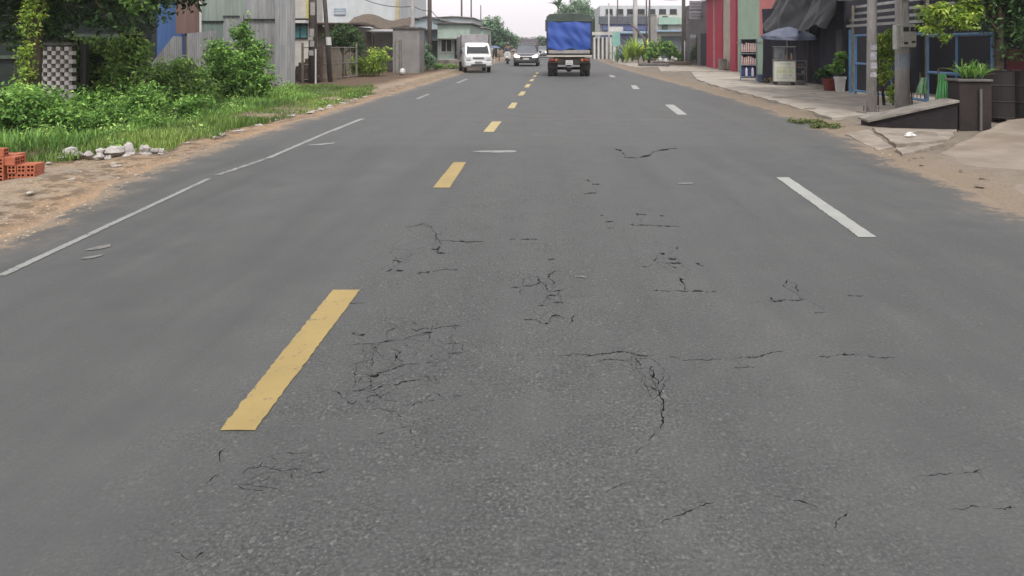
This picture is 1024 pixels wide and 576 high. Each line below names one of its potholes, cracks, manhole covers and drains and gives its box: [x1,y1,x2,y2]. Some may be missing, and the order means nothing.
crack [769,279,825,314]
crack [558,351,782,493]
crack [510,259,577,324]
crack [661,502,714,523]
crack [379,223,484,277]
crack [334,322,464,436]
crack [631,213,716,292]
crack [239,452,330,494]
crack [615,148,678,159]
